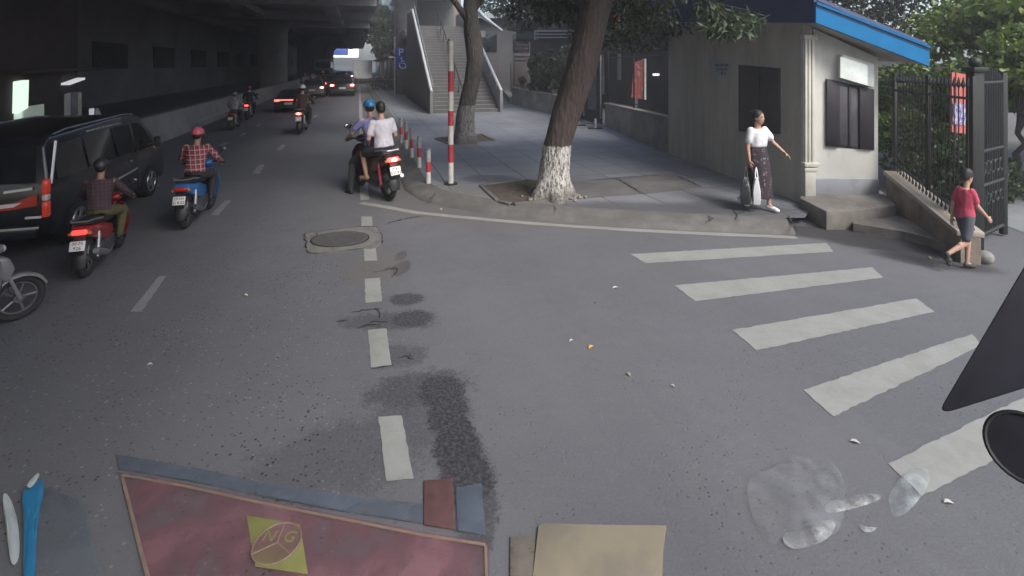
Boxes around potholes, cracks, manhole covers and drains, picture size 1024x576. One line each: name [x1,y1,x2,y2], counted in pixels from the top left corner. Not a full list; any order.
crack [336,308,388,328]
manhole cover [304,226,383,254]
